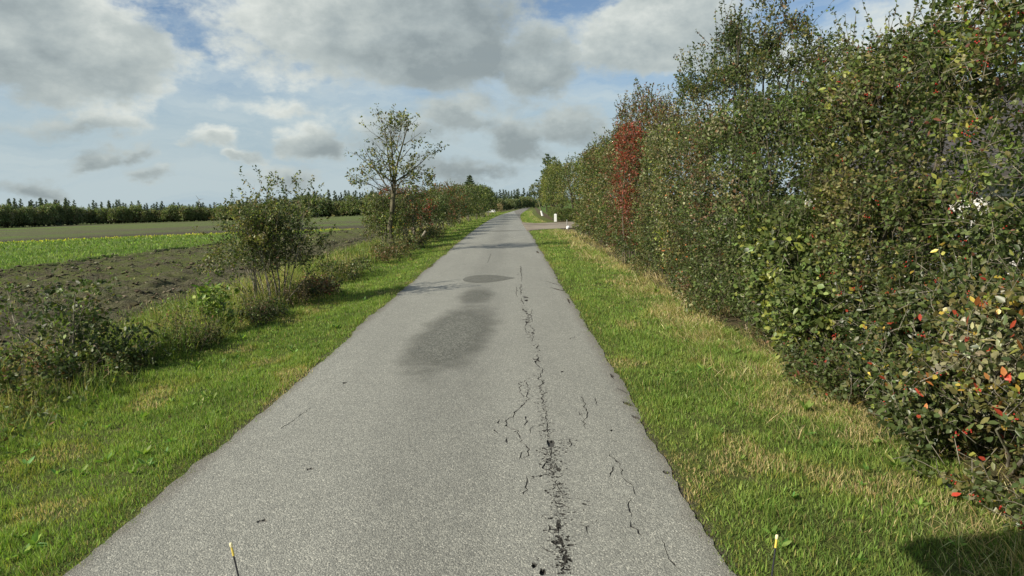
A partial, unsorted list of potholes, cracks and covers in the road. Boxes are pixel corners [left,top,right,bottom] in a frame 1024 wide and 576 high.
crack [494,309,641,535]
